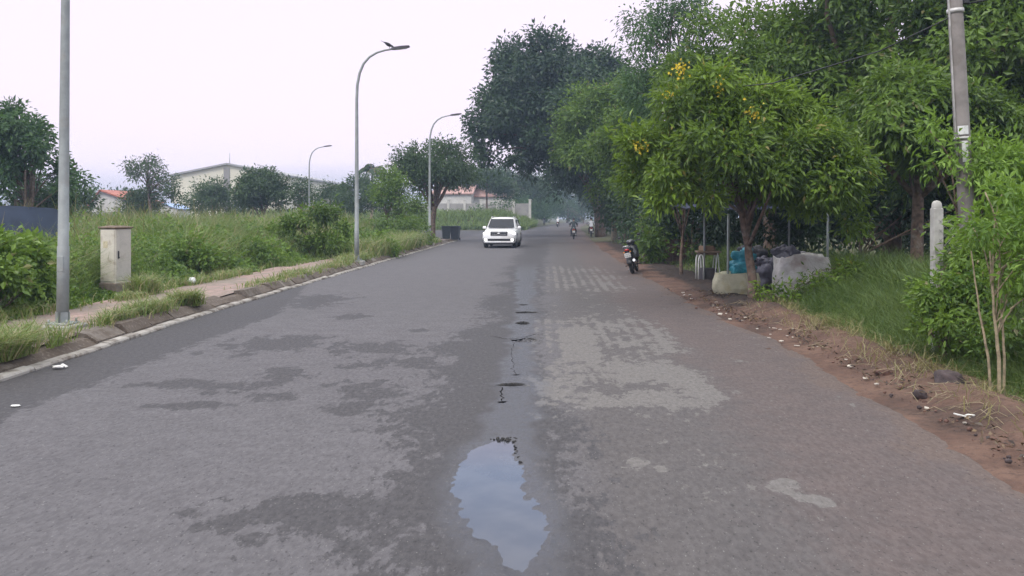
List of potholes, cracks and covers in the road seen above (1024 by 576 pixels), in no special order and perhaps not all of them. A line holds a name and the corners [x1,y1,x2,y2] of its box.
crack [492,334,537,403]
